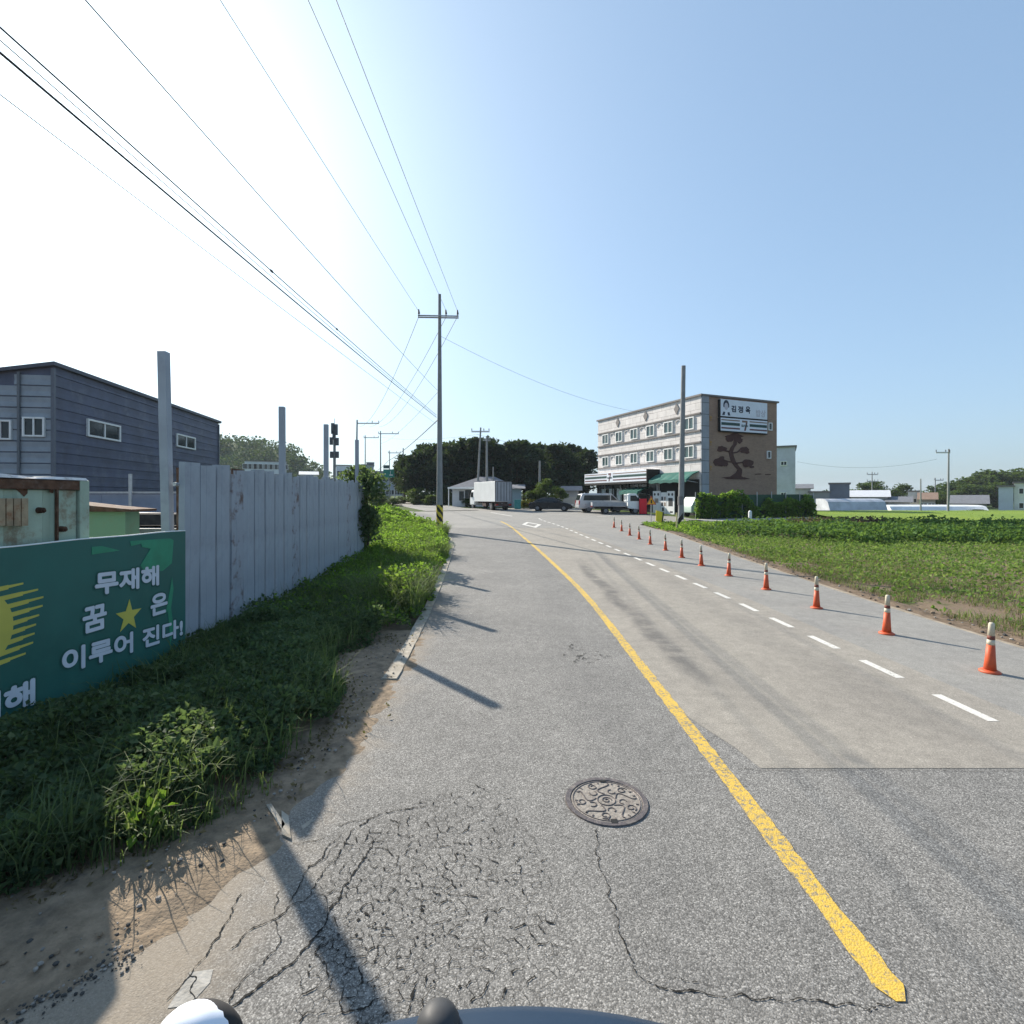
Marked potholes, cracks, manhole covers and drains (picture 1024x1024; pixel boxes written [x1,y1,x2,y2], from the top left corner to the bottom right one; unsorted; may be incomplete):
crack [595,829,893,1011]
manhole cover [565,777,649,827]
crack [168,782,569,1024]
